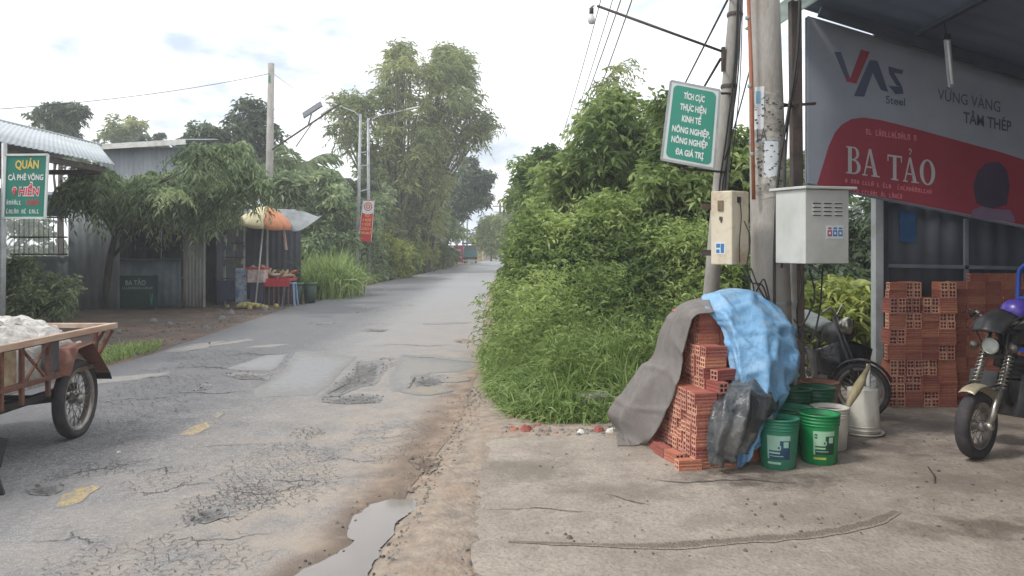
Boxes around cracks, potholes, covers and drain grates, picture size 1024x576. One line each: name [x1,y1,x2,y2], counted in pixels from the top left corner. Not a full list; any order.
pothole [190,505,229,524]
pothole [319,358,384,398]
pothole [26,480,65,496]
crack [488,494,645,512]
pothole [413,375,448,387]
crack [41,349,432,576]
